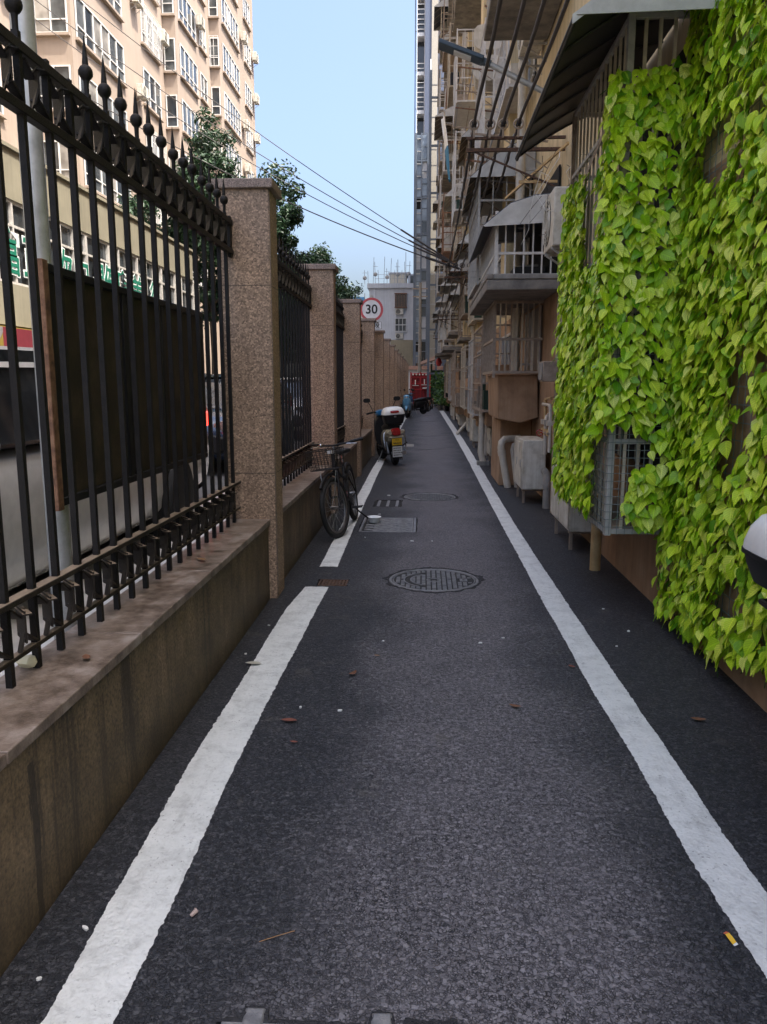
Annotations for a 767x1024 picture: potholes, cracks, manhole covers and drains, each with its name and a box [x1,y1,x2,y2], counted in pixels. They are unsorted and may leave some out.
manhole cover [214,1005,458,1024]
manhole cover [400,492,458,501]
manhole cover [382,567,486,594]
manhole cover [358,517,417,532]
